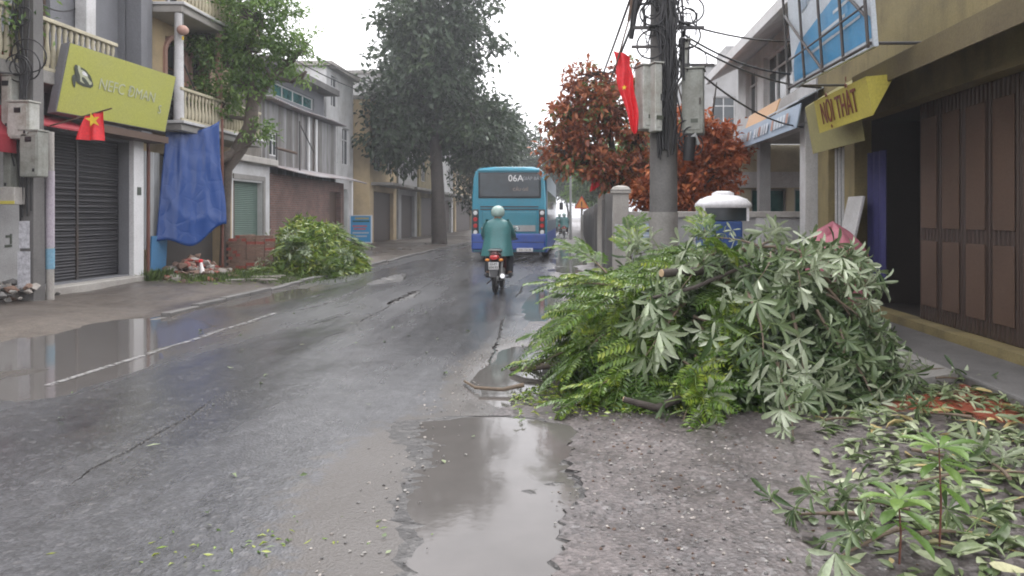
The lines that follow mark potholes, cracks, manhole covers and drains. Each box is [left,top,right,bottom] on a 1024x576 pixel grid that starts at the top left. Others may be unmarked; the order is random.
crack [488,315,524,365]
pothole [386,416,587,576]
